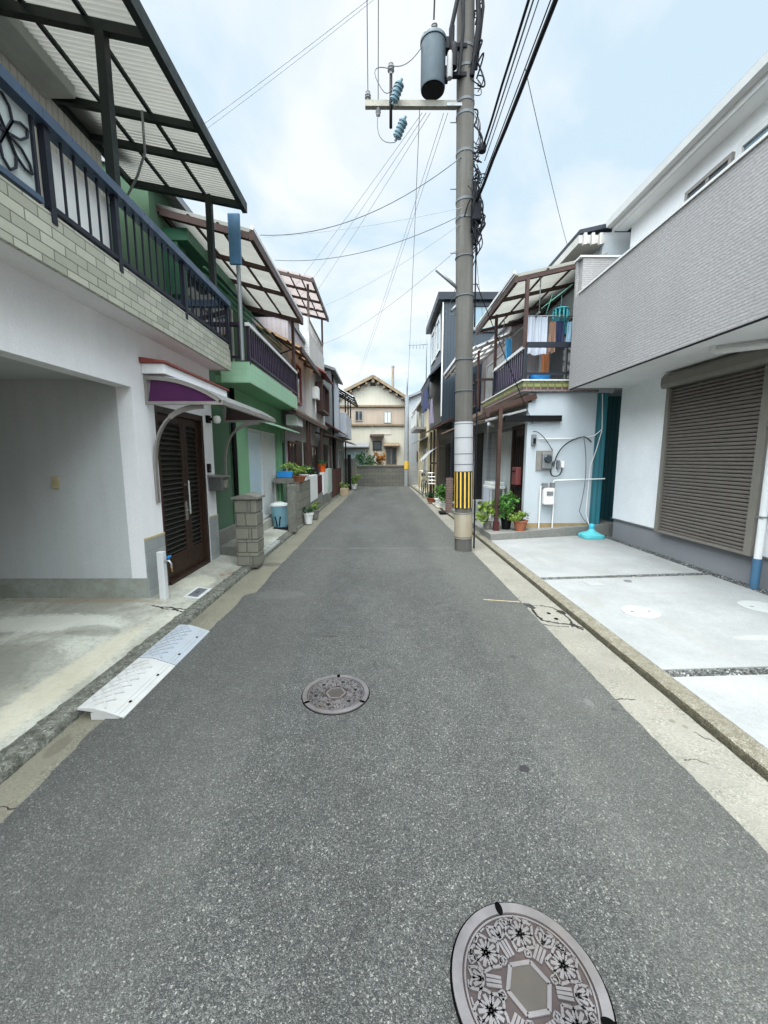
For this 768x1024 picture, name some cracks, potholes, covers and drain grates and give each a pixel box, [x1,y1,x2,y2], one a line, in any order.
manhole cover [450,902,617,1024]
utility cover [621,605,661,619]
manhole cover [301,674,370,715]
utility cover [737,600,768,613]
